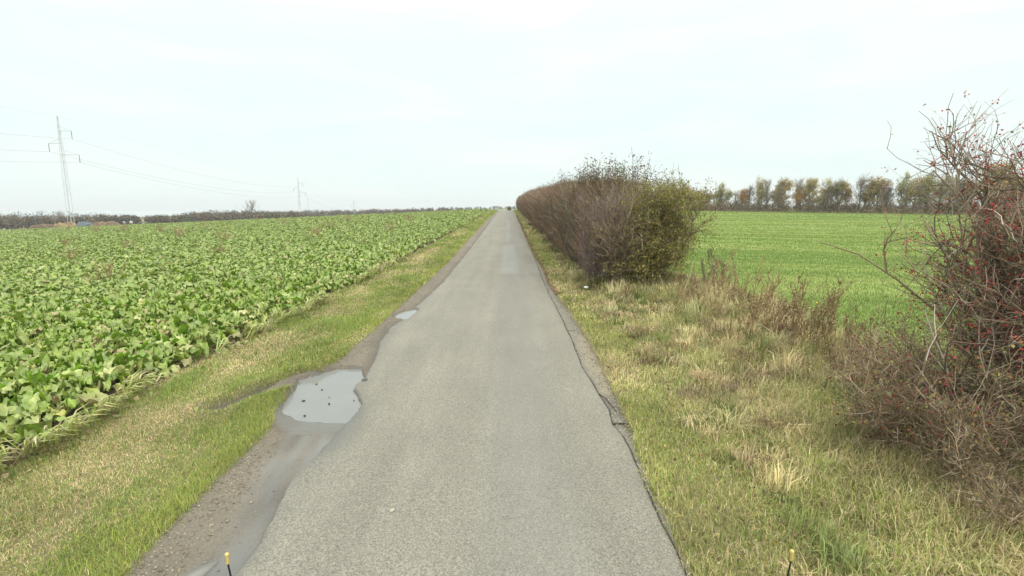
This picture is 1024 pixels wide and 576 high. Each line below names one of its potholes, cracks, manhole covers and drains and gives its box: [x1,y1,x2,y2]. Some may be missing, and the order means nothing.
pothole [269,364,368,435]
pothole [392,308,418,320]
